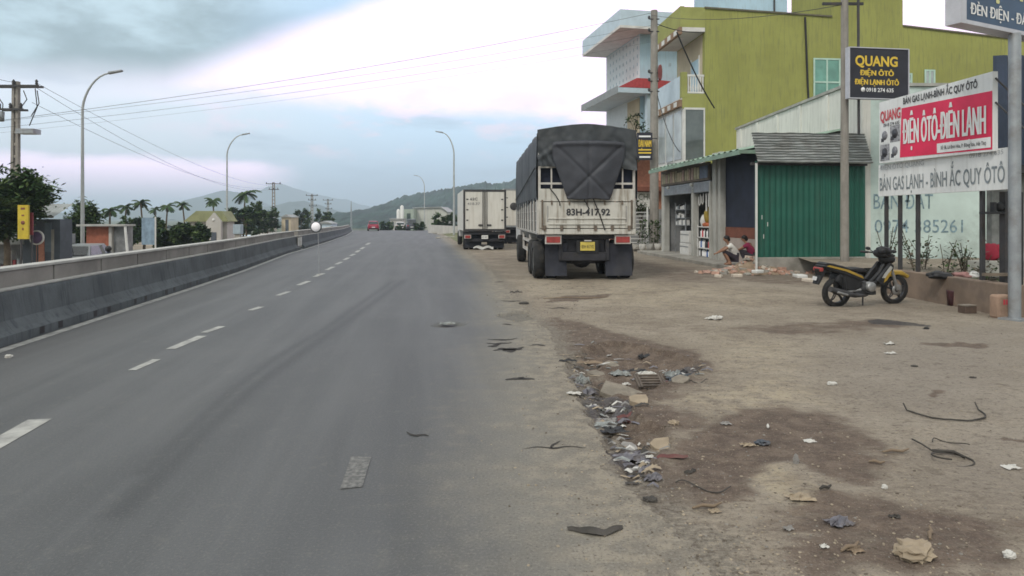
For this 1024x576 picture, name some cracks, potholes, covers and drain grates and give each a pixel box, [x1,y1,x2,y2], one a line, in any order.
drain grate [633,373,666,388]
